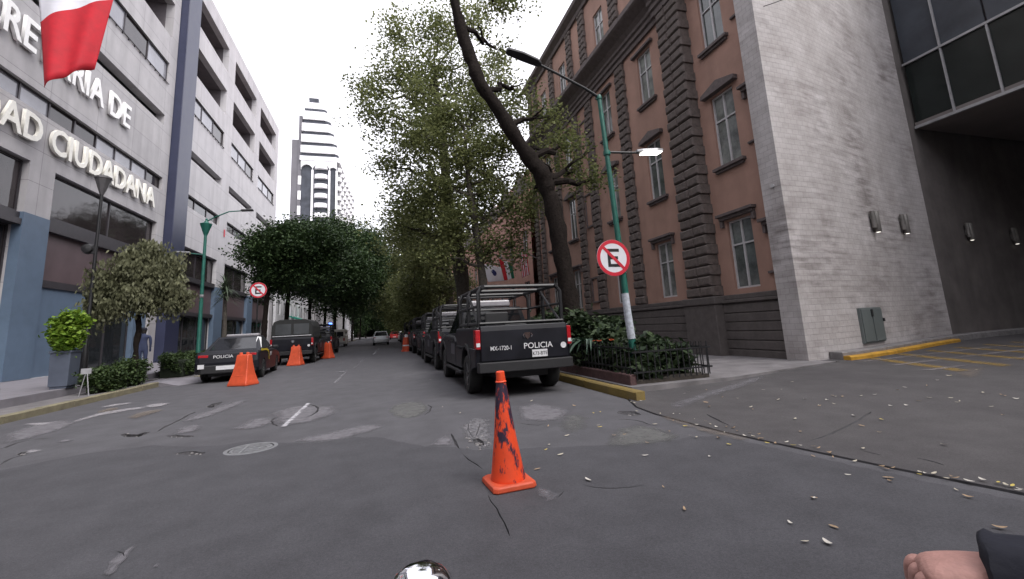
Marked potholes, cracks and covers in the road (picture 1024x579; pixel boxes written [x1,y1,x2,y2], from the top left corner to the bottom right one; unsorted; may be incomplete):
manhole cover [223,442,278,455]
pothole [465,435,491,450]
crack [451,422,481,468]
